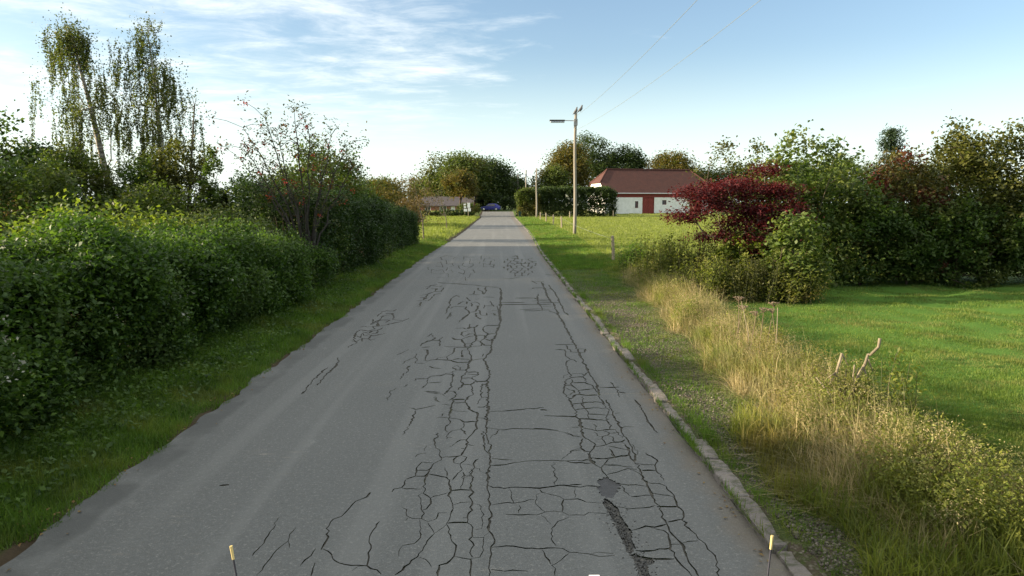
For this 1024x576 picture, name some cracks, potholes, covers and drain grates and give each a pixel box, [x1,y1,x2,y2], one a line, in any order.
crack [311,494,377,576]
pothole [622,547,669,576]
crack [387,256,719,576]
pothole [595,499,647,556]
